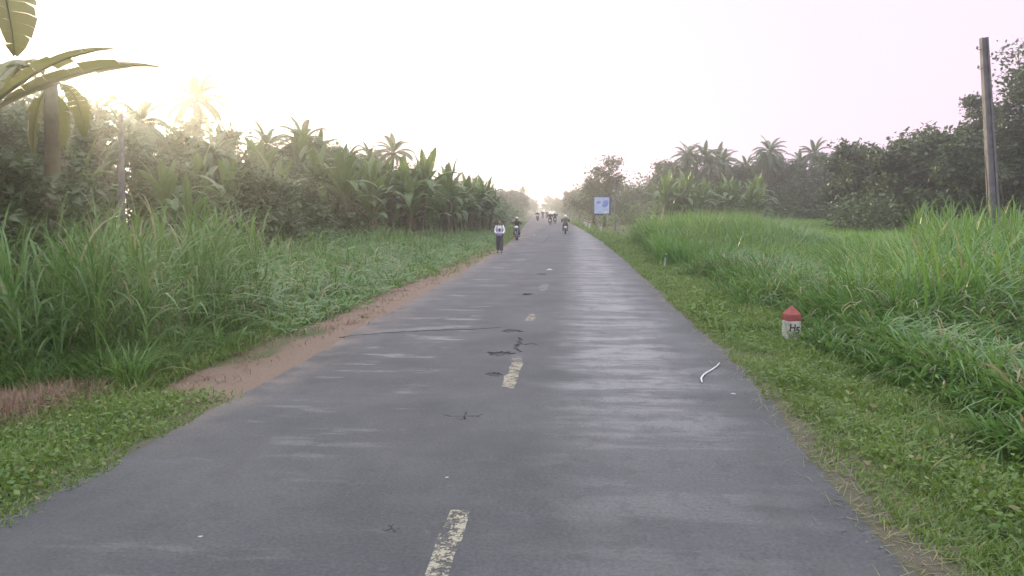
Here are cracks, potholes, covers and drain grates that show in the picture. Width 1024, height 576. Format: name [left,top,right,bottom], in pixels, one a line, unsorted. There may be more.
crack [339,327,537,353]
